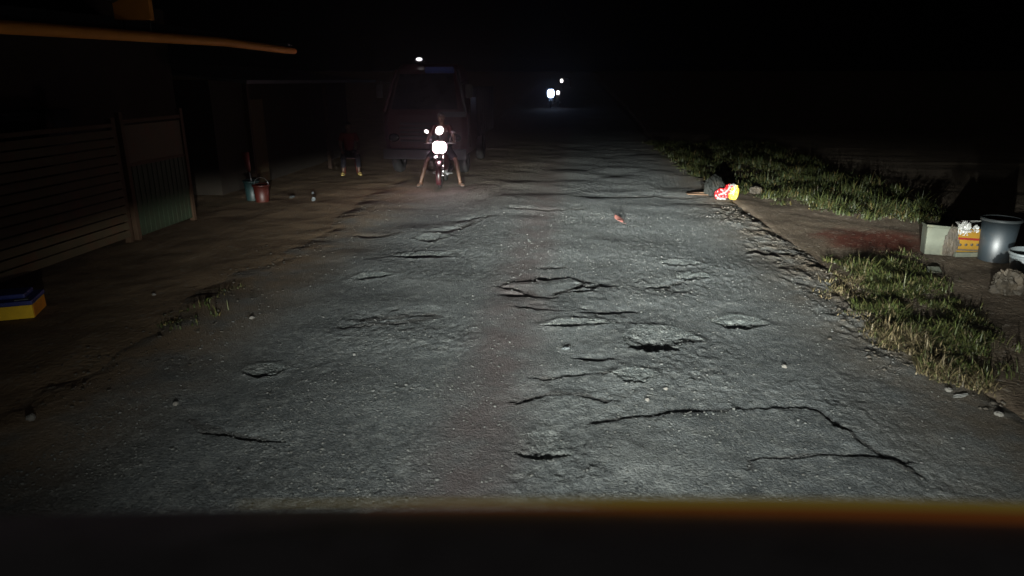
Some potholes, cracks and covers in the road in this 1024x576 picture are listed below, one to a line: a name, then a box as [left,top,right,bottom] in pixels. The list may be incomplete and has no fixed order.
pothole [620,323,709,352]
pothole [347,271,399,280]
pothole [706,313,774,330]
pothole [413,232,450,243]
crack [185,418,271,444]
crack [517,359,924,480]
pothole [610,365,661,384]
pothole [540,317,619,328]
pothole [239,362,292,379]
